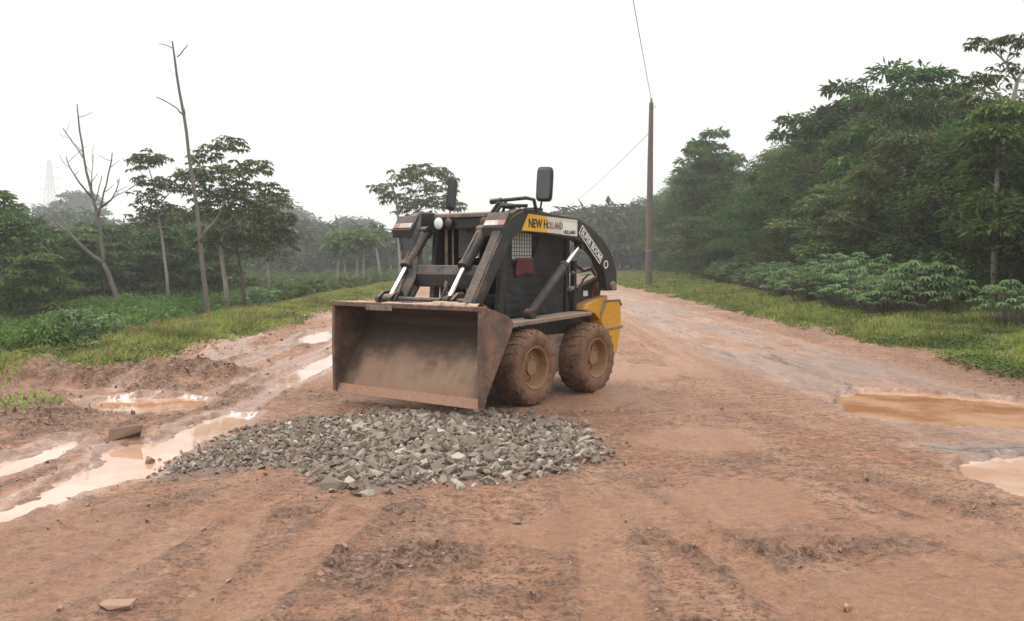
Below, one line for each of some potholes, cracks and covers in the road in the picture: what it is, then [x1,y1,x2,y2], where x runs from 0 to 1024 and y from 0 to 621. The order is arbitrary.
pothole [76,390,214,413]
pothole [0,410,262,522]
pothole [951,450,1024,497]
pothole [825,386,1024,429]
